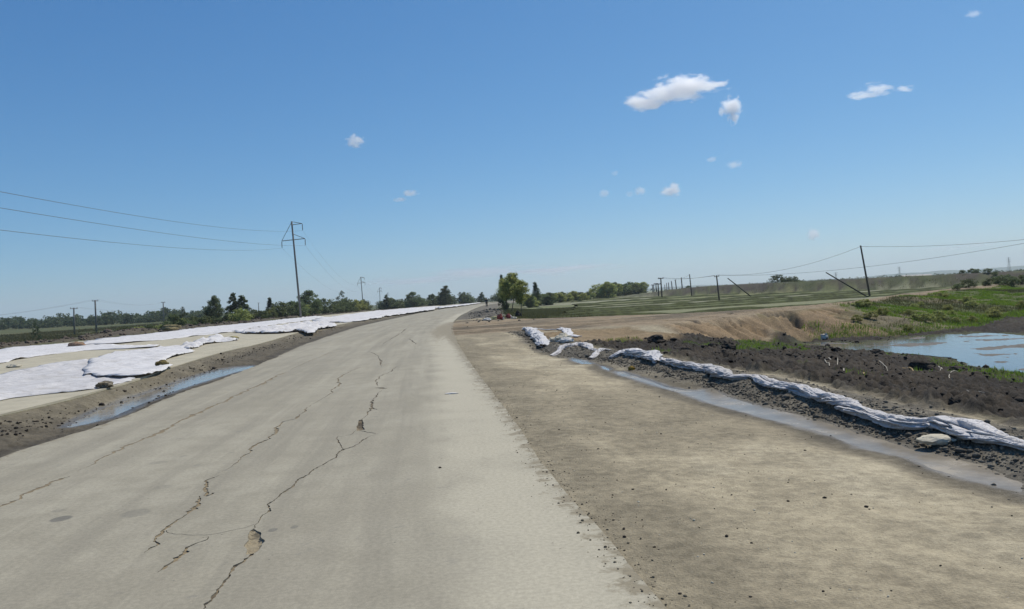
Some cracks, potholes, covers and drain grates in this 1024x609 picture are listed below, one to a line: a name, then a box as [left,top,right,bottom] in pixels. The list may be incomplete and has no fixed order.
crack [144,329,405,609]
pothole [244,529,265,555]
crack [0,354,326,507]
